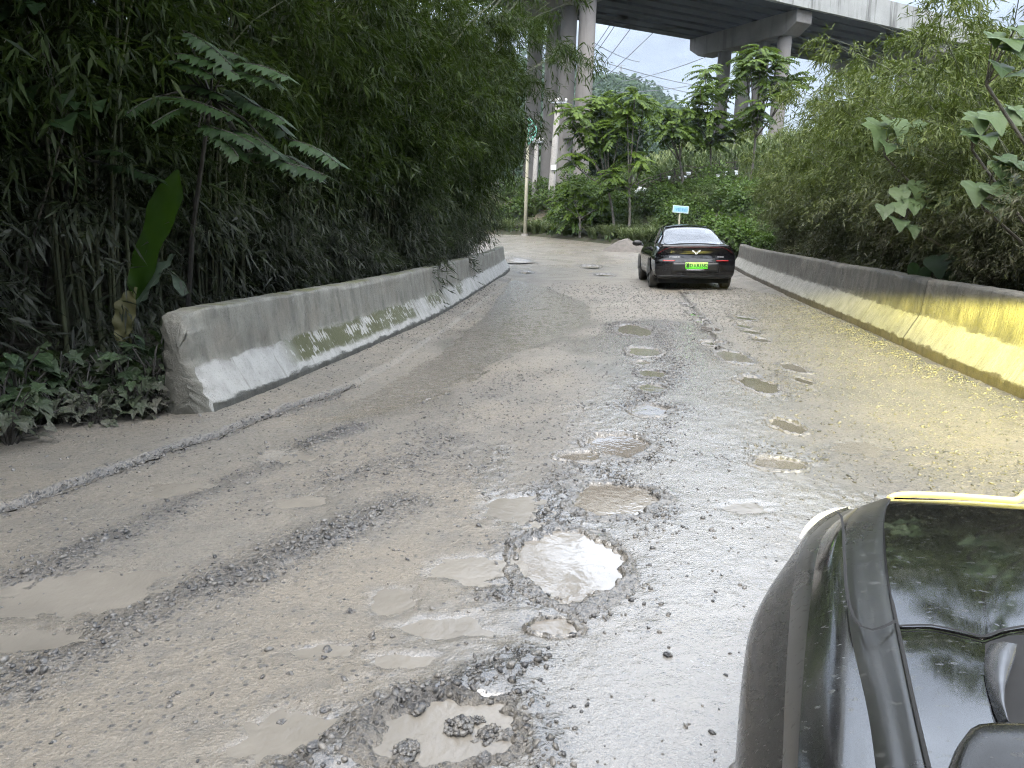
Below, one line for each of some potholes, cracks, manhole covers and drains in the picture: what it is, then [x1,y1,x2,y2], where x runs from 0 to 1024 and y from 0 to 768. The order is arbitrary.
pothole [577,431,660,463]
pothole [731,373,787,397]
pothole [340,682,532,768]
pothole [764,415,814,437]
pothole [746,453,812,473]
pothole [559,479,676,522]
pothole [522,614,586,641]
pothole [502,521,639,619]
pothole [624,346,666,358]
pothole [625,401,677,418]
pothole [611,323,658,338]
crack [0,384,356,513]
